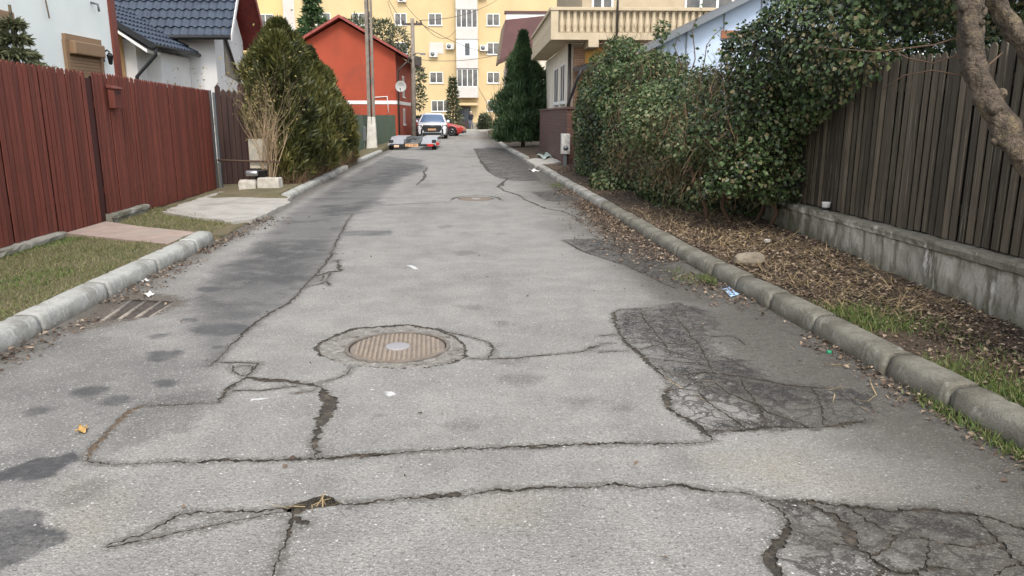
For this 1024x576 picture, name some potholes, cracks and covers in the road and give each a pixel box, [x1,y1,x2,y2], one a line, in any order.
crack [86,308,867,465]
crack [761,499,1024,576]
crack [307,252,344,287]
drain grate [101,300,176,321]
manhole cover [319,325,465,369]
pothole [282,495,340,516]
